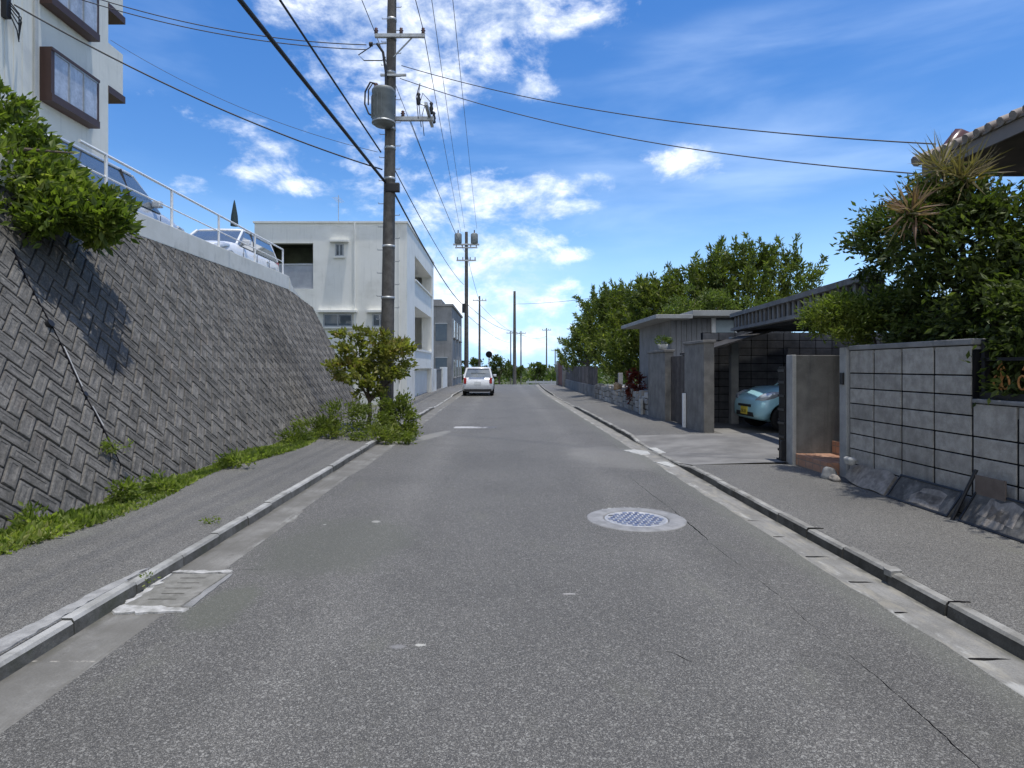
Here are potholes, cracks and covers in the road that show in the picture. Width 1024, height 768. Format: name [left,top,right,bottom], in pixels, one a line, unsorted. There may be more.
crack [636,482,980,768]
manhole cover [587,507,687,532]
